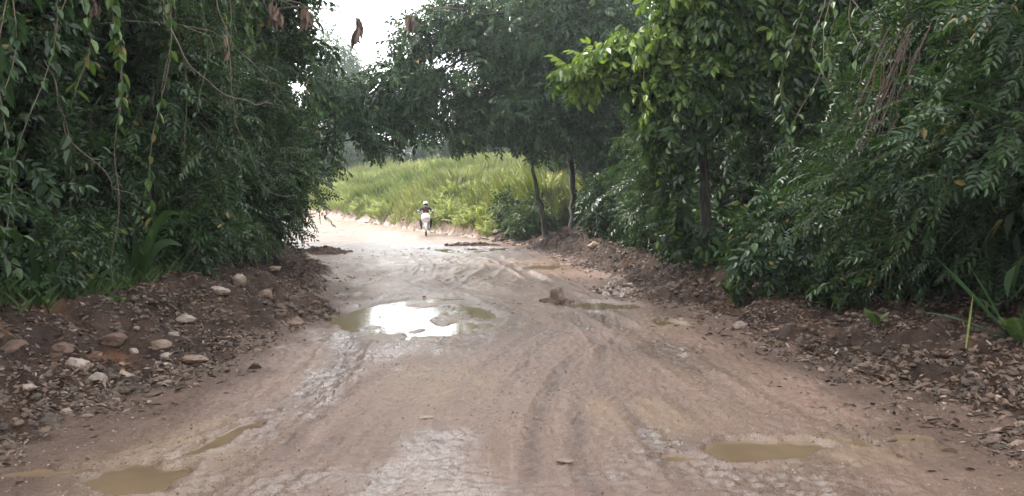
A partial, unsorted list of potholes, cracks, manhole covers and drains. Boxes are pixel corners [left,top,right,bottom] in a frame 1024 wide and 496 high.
pothole [538,299,660,310]
pothole [302,289,524,346]
pothole [163,408,284,464]
pothole [699,432,843,463]
pothole [69,447,204,496]
